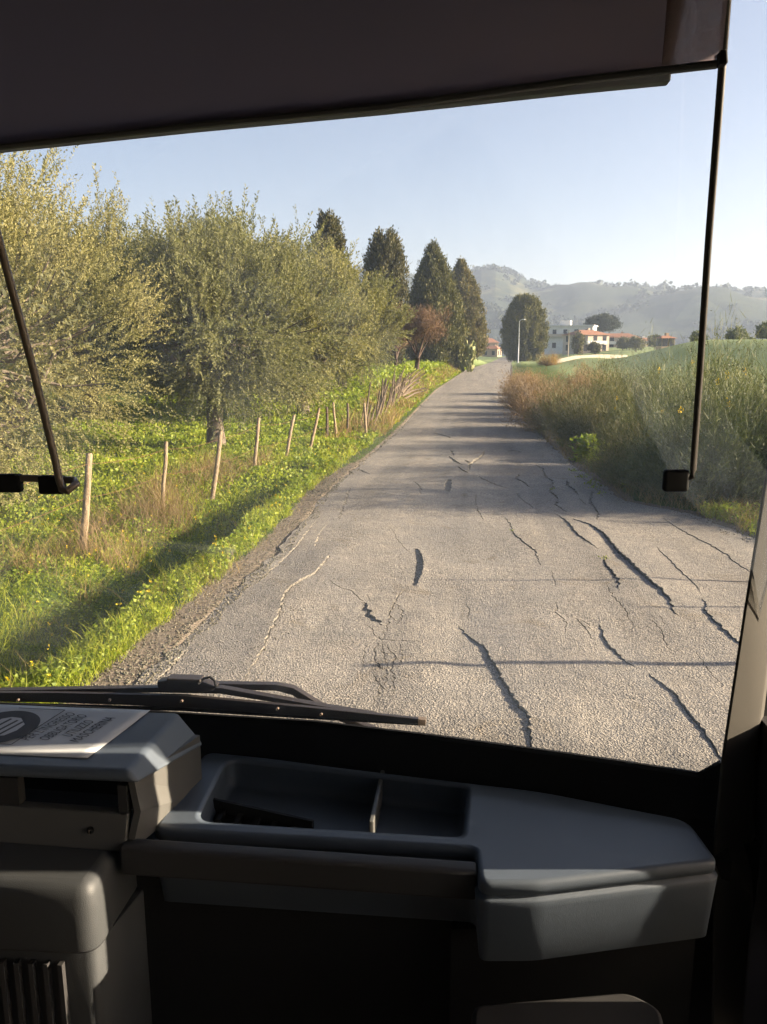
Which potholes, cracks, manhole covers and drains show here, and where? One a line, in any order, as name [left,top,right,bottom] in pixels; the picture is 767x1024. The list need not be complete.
crack [435,433,750,758]
crack [245,469,406,707]
